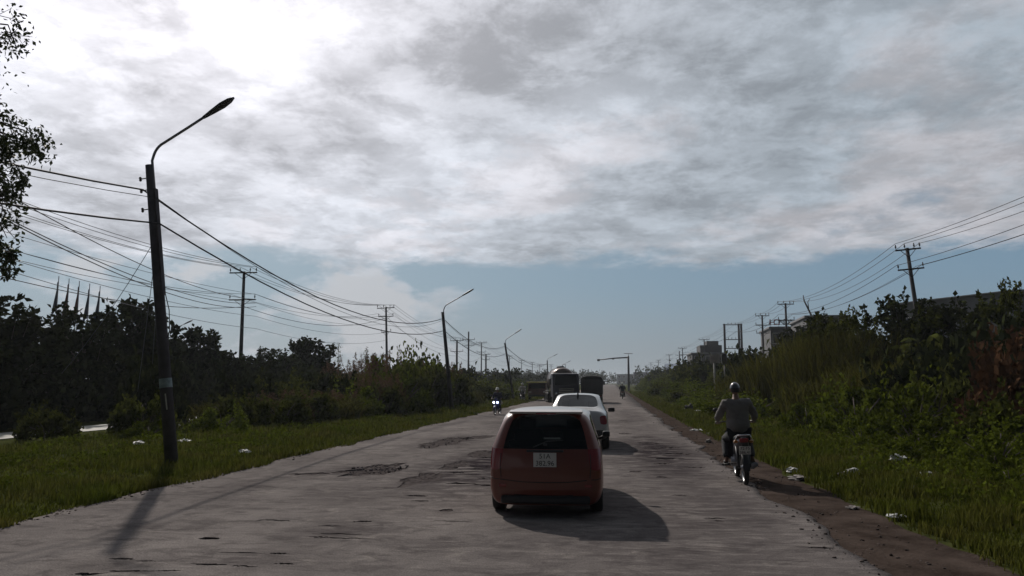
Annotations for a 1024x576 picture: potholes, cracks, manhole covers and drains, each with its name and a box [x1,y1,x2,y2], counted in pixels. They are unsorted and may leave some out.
pothole [289,463,409,477]
pothole [417,435,494,449]
